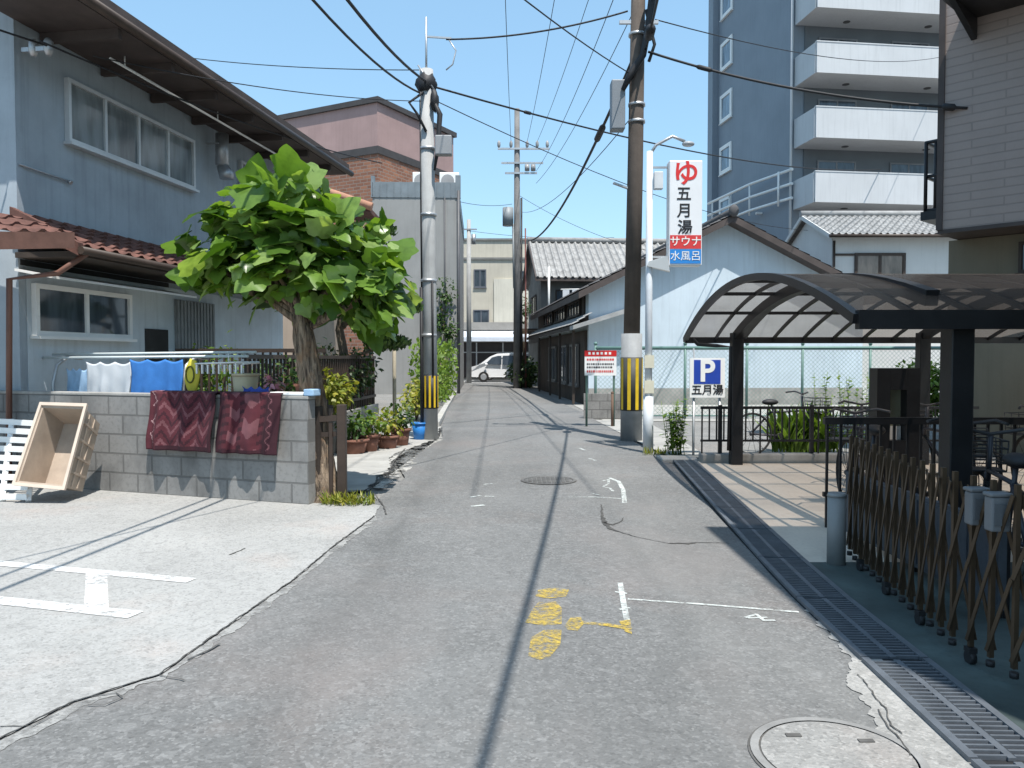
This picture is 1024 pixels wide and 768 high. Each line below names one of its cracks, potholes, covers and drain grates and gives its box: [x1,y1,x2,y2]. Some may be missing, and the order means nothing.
crack [857,674,911,755]
crack [352,448,406,514]
manhole cover [748,717,930,768]
manhole cover [521,476,577,485]
crack [600,505,722,544]
